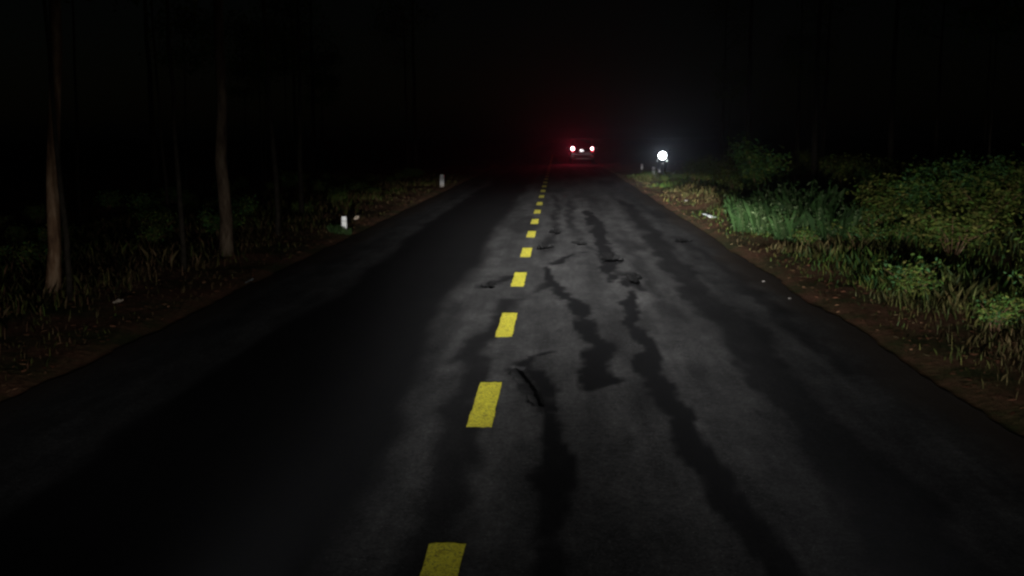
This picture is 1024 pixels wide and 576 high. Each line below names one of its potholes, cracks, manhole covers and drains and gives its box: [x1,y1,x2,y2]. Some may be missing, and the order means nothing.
pothole [531,243,560,251]
pothole [594,252,630,263]
crack [511,356,557,414]
pothole [474,280,504,291]
pothole [620,271,649,287]
